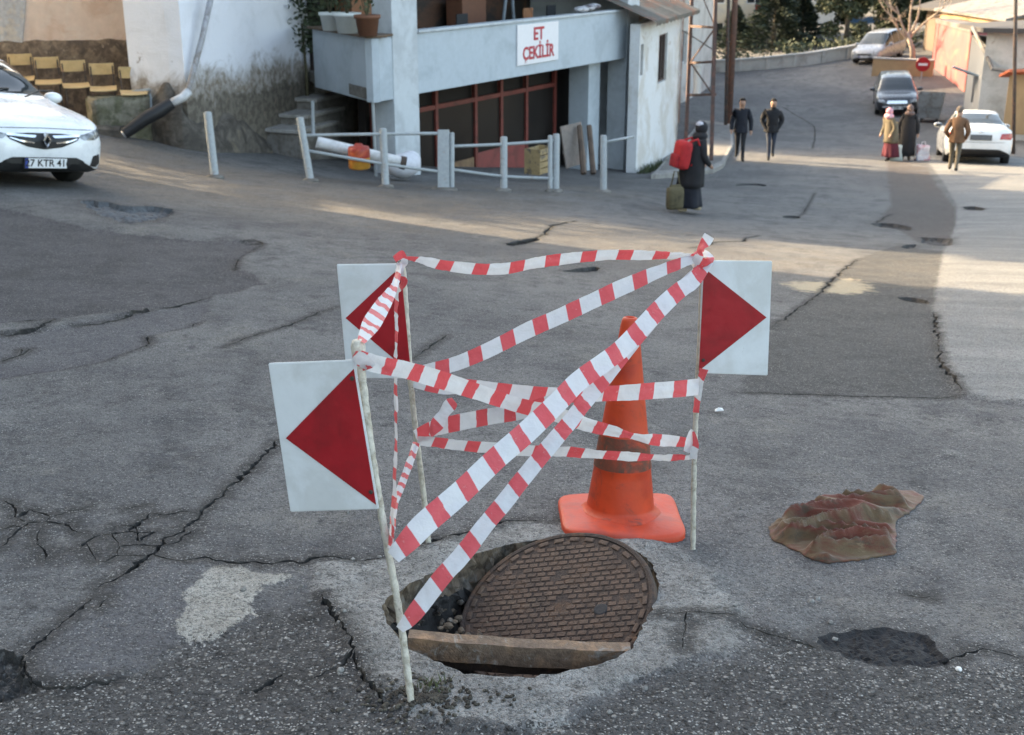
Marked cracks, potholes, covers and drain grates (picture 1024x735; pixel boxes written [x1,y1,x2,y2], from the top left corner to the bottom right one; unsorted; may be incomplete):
pothole [0,649,40,703]
crack [76,299,202,327]
manhole cover [460,533,658,678]
pothole [80,200,174,224]
crack [932,314,962,391]
crack [1,318,56,362]
crack [0,440,536,690]
crack [253,674,283,693]
crack [229,310,326,345]
crack [506,222,567,245]
pothole [816,627,950,668]
